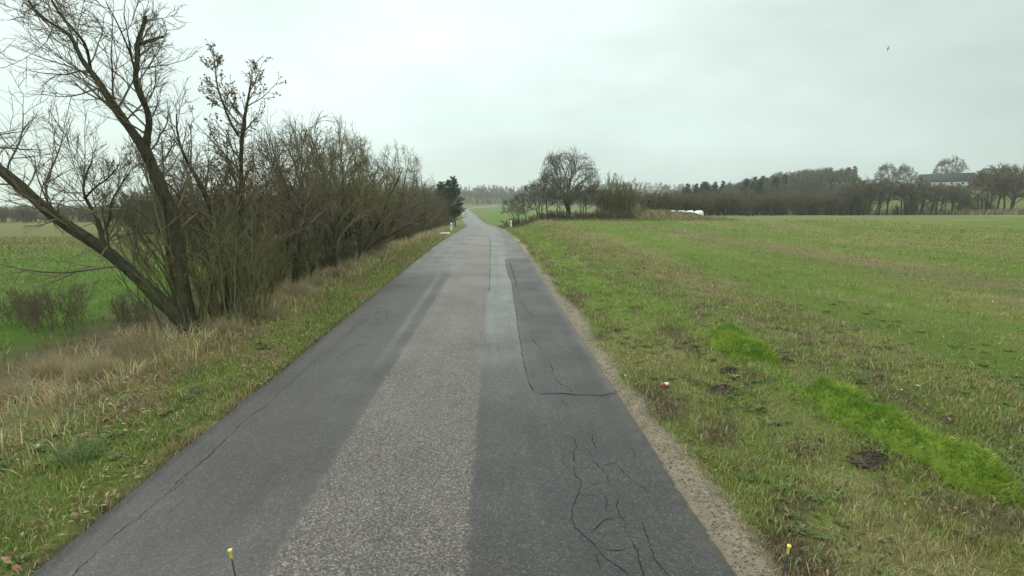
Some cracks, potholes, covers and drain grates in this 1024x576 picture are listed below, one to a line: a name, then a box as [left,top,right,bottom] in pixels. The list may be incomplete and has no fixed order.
crack [562,428,668,576]
crack [72,311,382,576]
